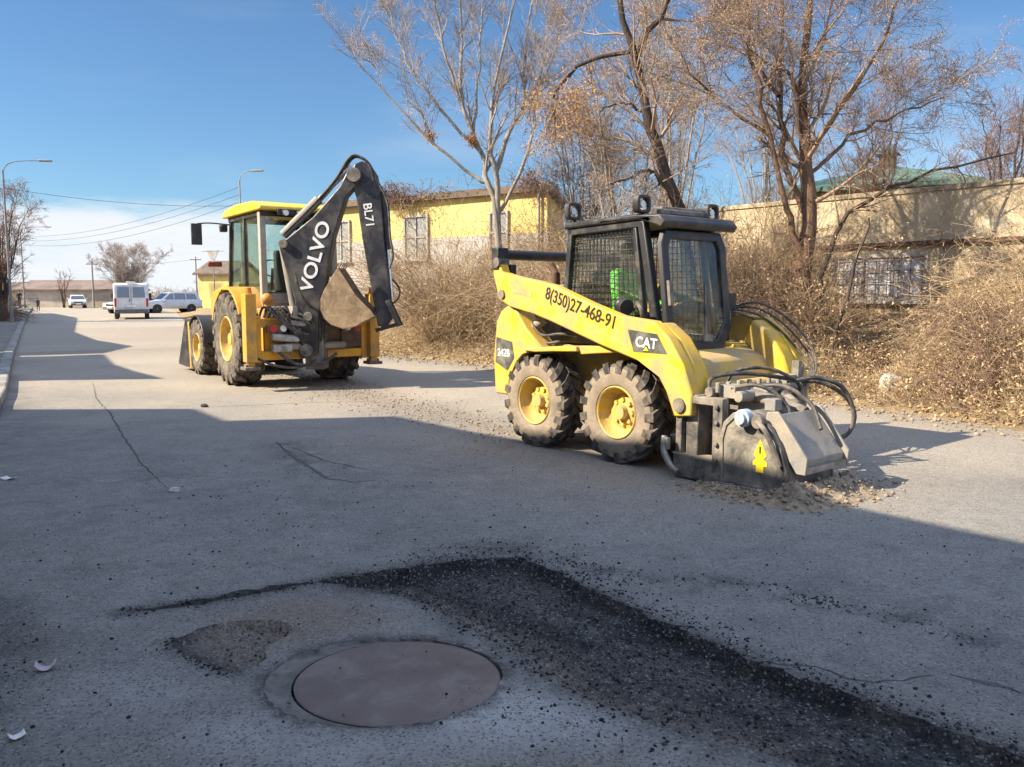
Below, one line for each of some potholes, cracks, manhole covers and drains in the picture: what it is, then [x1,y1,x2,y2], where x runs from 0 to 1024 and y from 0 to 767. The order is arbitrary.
crack [276,441,376,482]
crack [93,383,170,489]
pothole [170,619,295,672]
manhole cover [263,638,503,728]
crack [757,661,1023,694]
